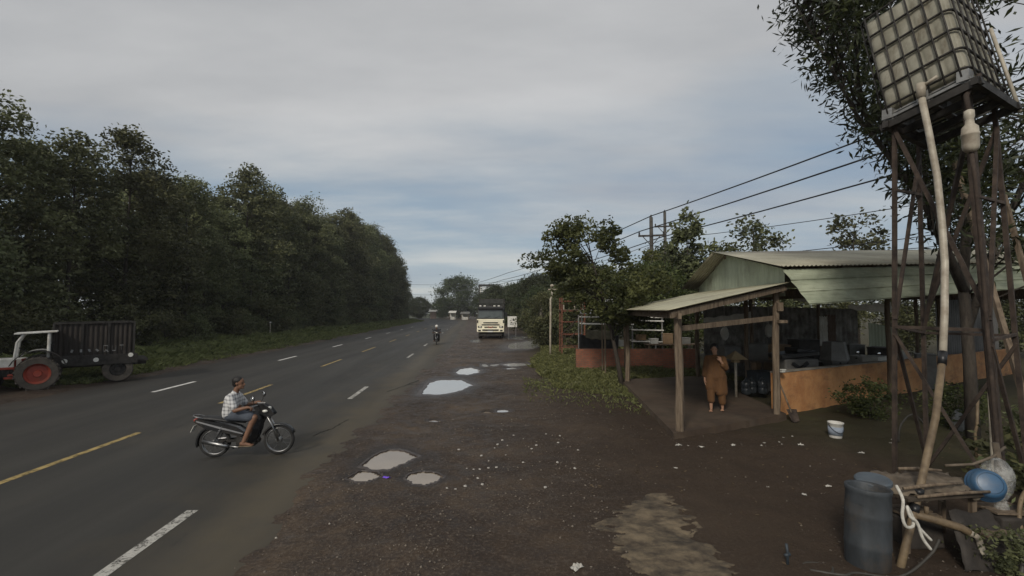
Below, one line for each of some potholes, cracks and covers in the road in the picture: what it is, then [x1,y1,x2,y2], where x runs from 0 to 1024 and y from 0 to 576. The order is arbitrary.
pothole [504,340,541,350]
pothole [403,470,446,486]
pothole [357,448,422,473]
pothole [416,379,477,396]
pothole [454,367,483,376]
pothole [344,470,384,483]
